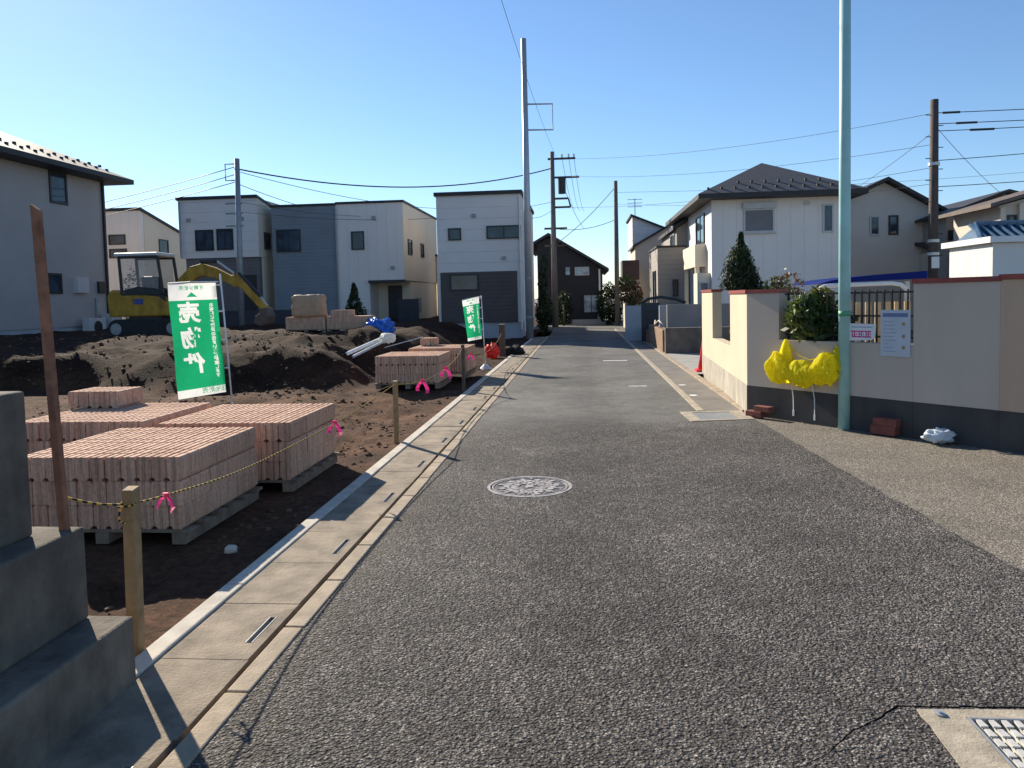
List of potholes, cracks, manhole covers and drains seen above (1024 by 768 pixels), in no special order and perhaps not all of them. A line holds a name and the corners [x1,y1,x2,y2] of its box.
drain grate [916,709,1024,768]
crack [798,705,1024,768]
drain grate [680,410,755,422]
manhole cover [487,476,572,497]
